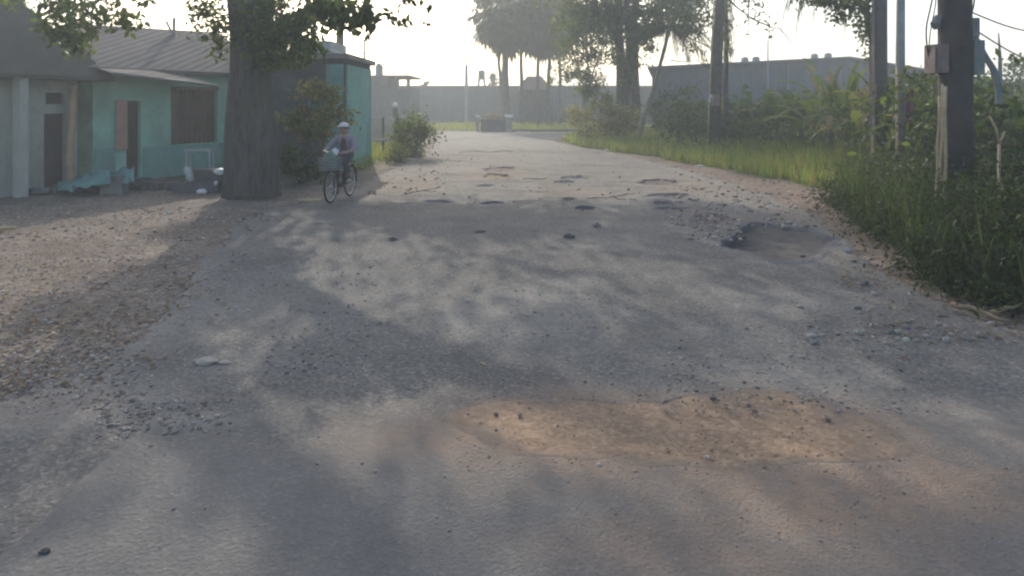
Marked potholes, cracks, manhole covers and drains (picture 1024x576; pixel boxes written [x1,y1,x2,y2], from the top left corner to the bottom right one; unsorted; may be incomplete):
pothole [716,221,843,265]
